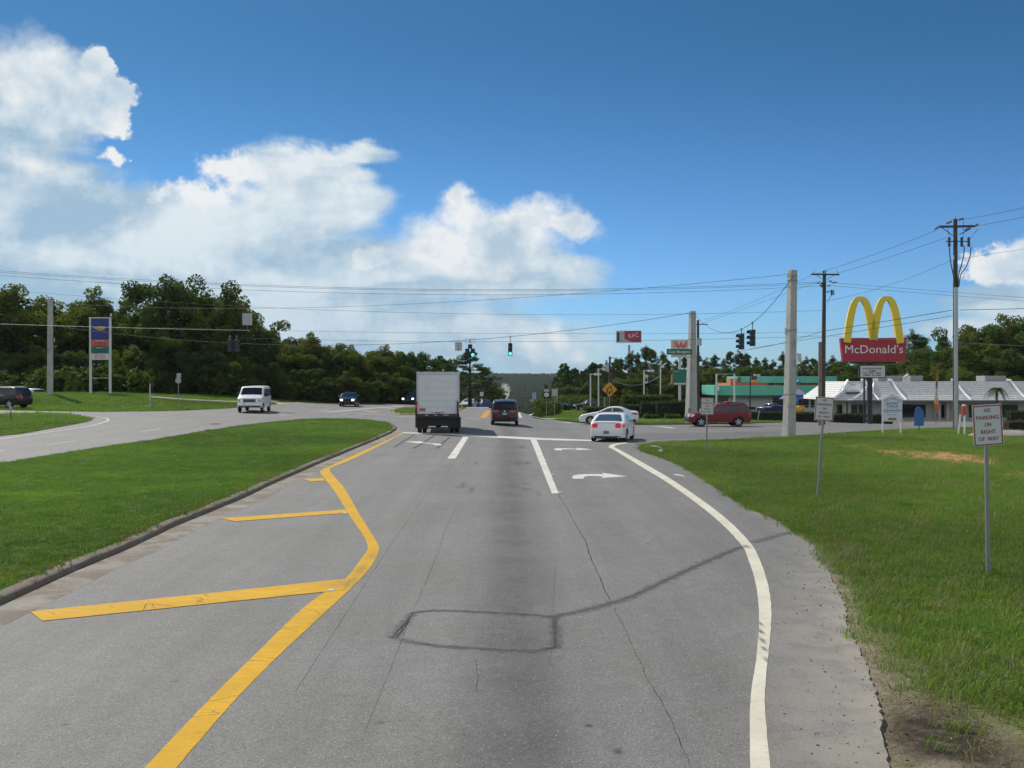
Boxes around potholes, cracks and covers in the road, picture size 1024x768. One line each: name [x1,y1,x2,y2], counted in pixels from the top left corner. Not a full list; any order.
crack [559,495,690,766]
